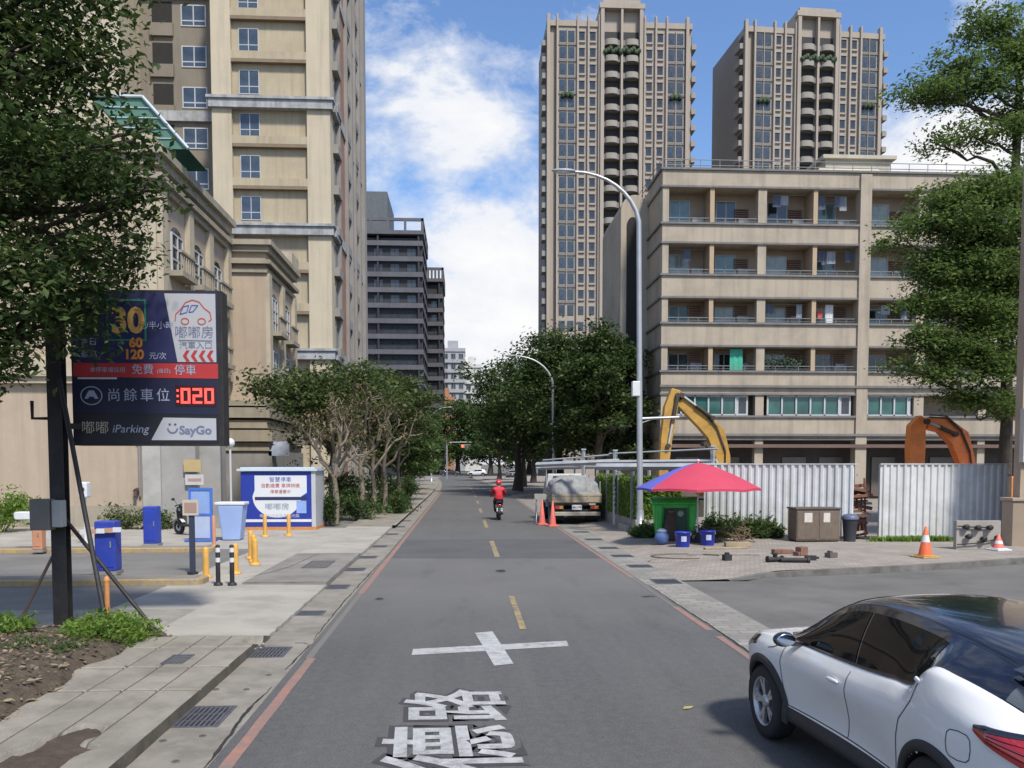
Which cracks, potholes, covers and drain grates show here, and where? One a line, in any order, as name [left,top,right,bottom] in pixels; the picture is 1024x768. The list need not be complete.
drain grate [170,705,238,728]
manhole cover [160,654,195,665]
drain grate [248,646,293,658]
